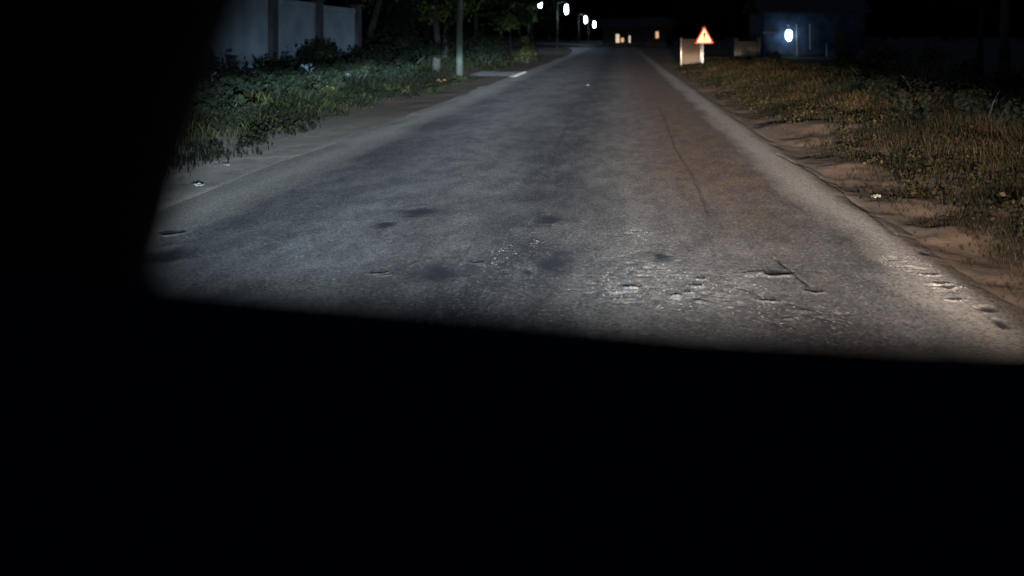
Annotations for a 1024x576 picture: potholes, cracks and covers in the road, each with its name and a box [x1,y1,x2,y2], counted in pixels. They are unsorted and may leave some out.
pothole [969,304,1003,314]
pothole [762,267,792,275]
crack [657,106,716,259]
crack [737,259,850,324]
pothole [989,316,1016,330]
